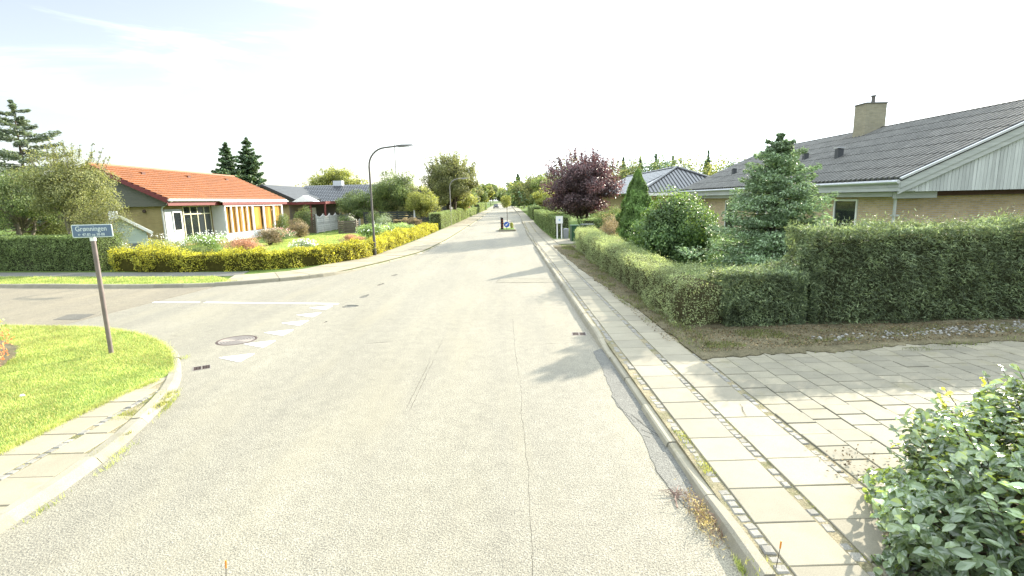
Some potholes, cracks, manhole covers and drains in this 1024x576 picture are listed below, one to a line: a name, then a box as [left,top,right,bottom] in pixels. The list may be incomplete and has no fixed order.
manhole cover [215,335,258,345]
